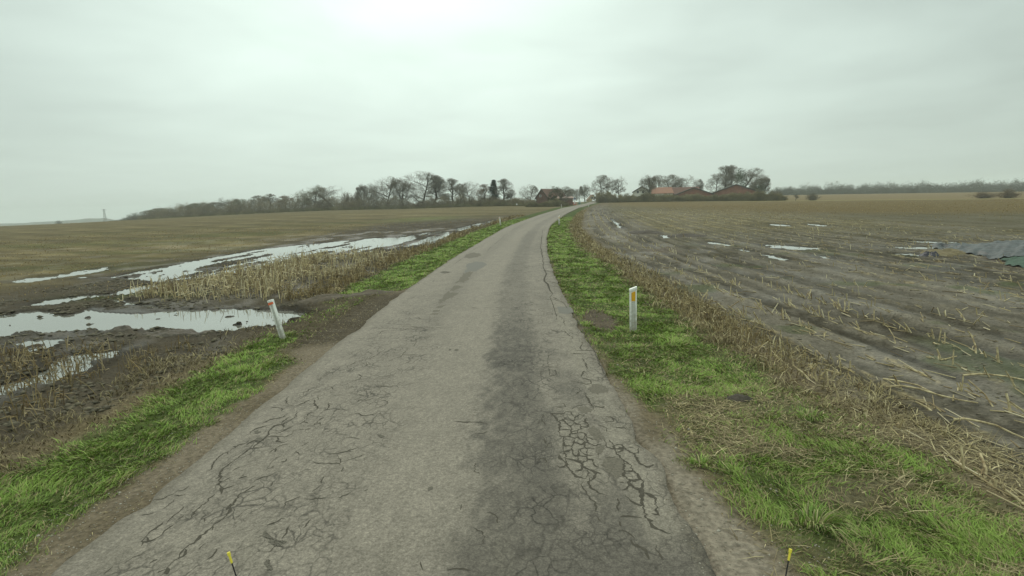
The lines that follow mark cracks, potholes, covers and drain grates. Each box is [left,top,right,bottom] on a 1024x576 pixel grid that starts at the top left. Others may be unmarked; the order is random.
crack [104,324,430,574]
crack [537,232,670,560]
